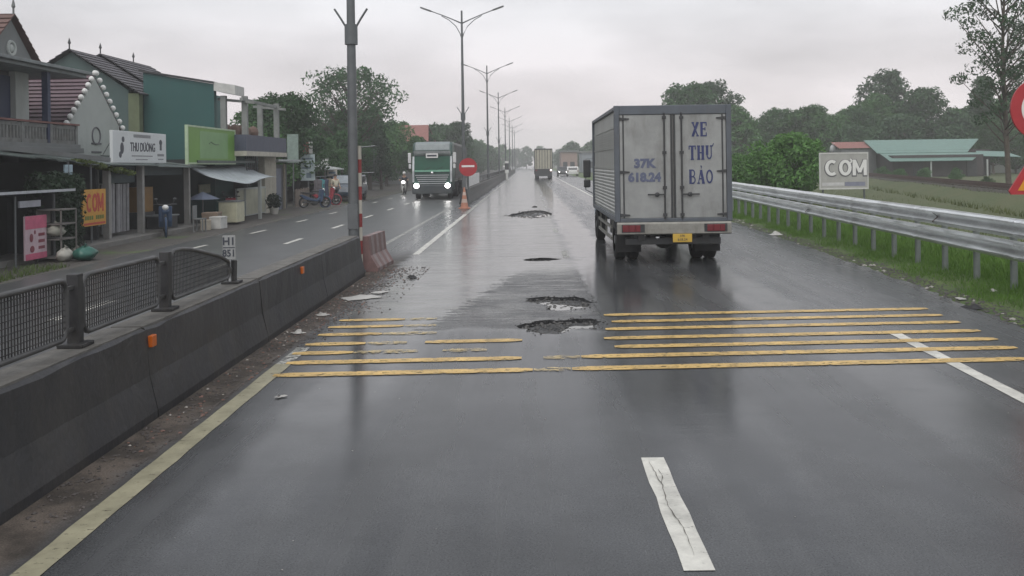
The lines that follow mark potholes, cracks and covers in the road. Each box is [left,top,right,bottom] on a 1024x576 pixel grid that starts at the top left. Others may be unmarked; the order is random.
crack [650,464,694,553]
pothole [526,295,597,311]
pothole [504,210,552,219]
pothole [515,316,608,334]
